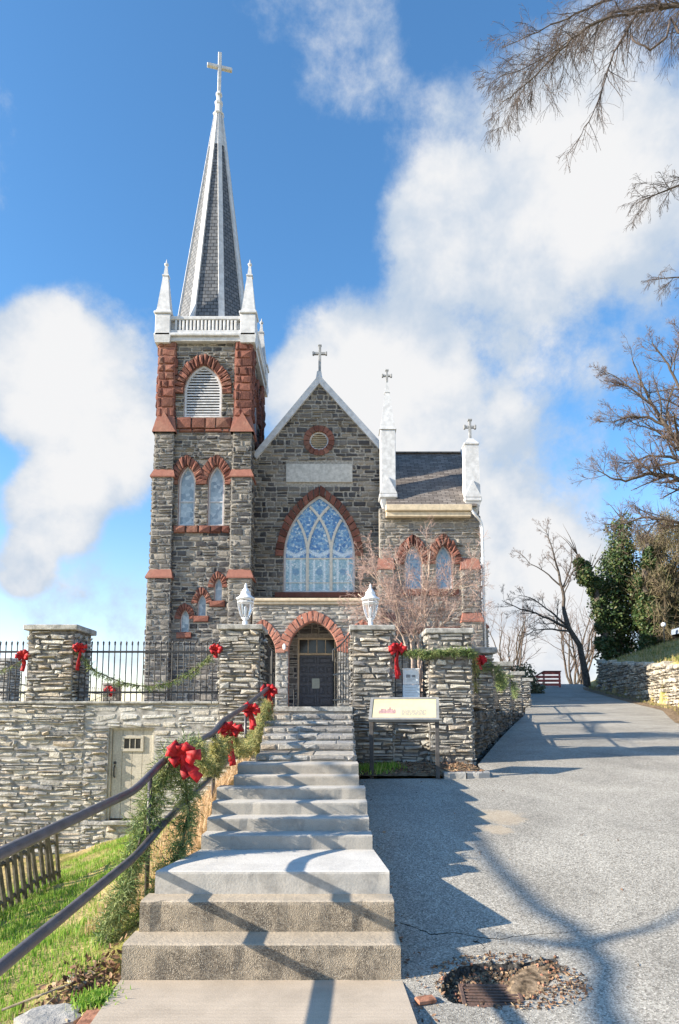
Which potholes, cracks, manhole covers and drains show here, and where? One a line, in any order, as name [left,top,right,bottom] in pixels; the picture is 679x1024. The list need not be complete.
drain grate [458,984,524,1008]
crack [401,909,656,949]
